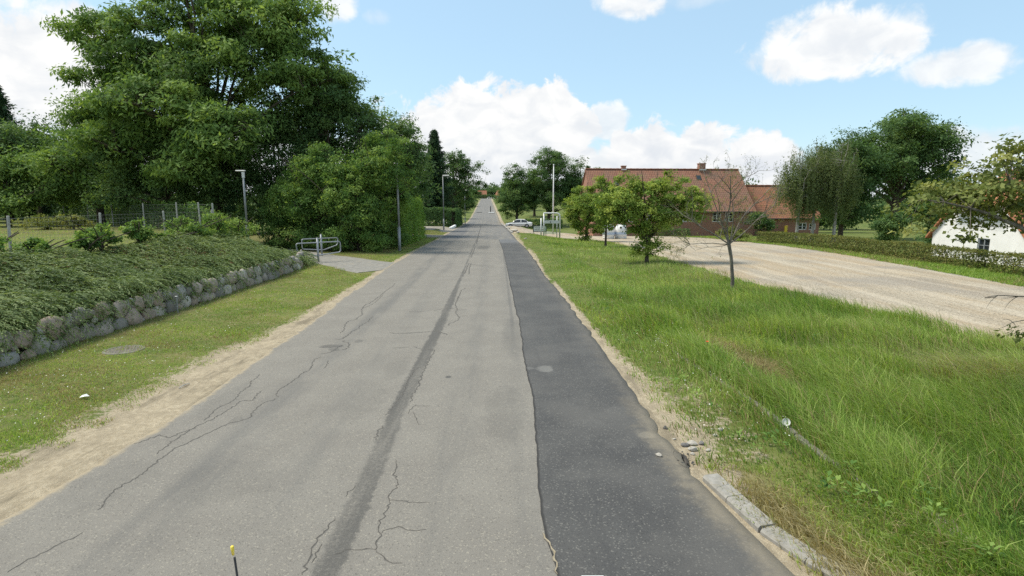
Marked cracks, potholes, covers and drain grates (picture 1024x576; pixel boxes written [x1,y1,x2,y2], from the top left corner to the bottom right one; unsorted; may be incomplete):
manhole cover [102,345,145,355]
crack [301,246,479,575]
crack [98,283,395,510]
